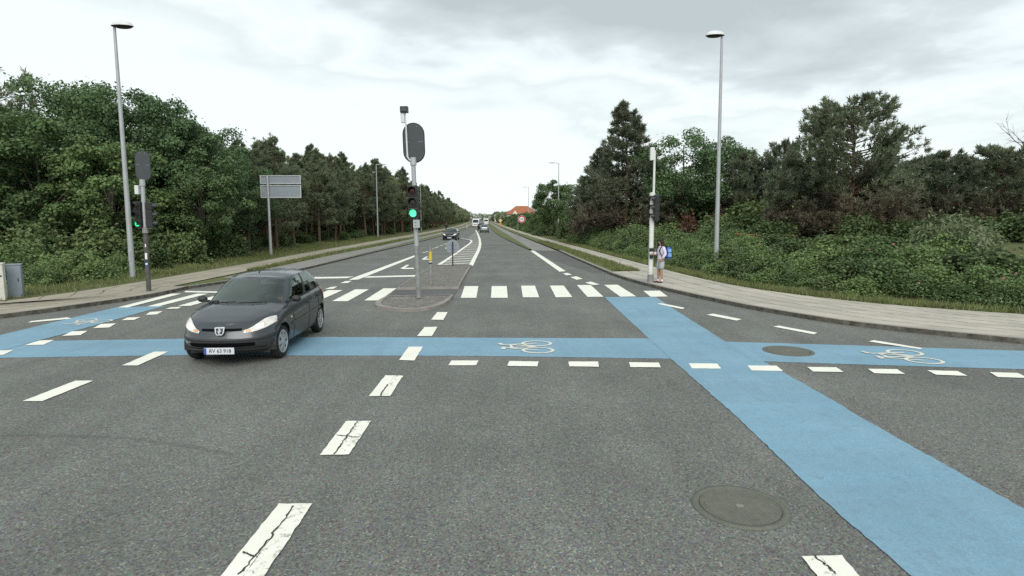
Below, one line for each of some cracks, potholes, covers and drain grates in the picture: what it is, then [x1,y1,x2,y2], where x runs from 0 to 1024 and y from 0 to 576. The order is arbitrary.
crack [237,506,293,574]
manhole cover [692,485,790,531]
manhole cover [762,346,815,357]
crack [333,421,359,454]
